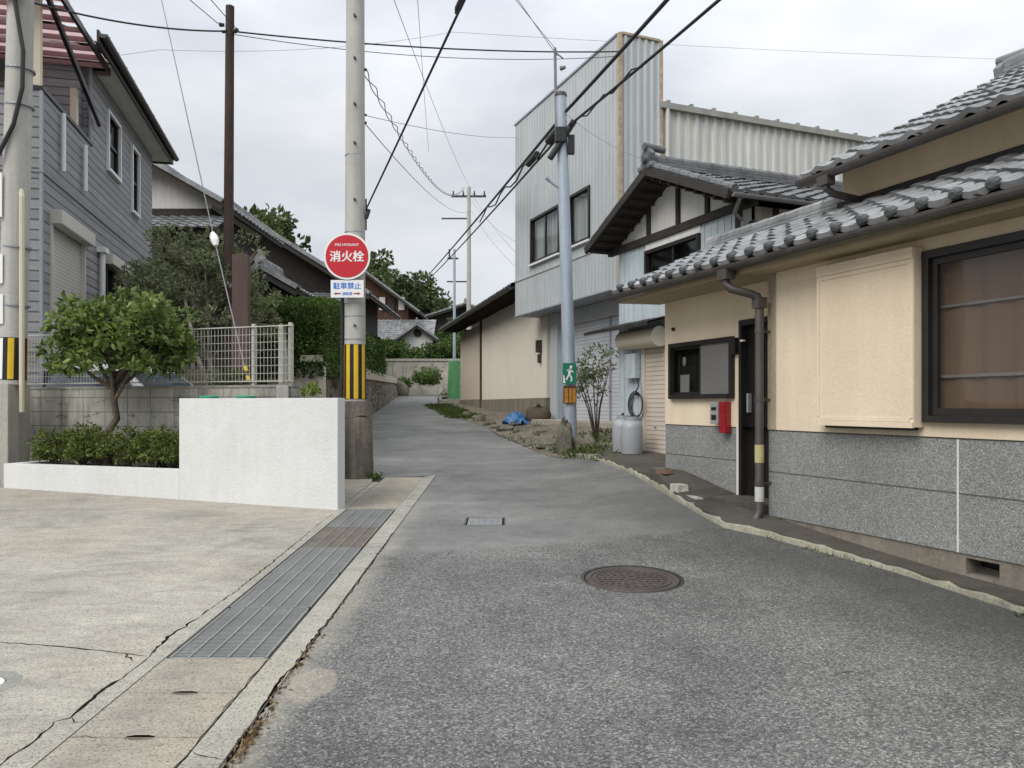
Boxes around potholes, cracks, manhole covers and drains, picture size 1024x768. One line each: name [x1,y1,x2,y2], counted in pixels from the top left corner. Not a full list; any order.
drain grate [229,573,340,611]
drain grate [169,608,310,659]
manhole cover [580,566,685,593]
utility cover [0,671,23,691]
drain grate [271,547,362,575]
crack [0,517,328,766]
crack [173,533,394,768]
drain grate [303,527,379,549]
drain grate [327,509,394,529]
